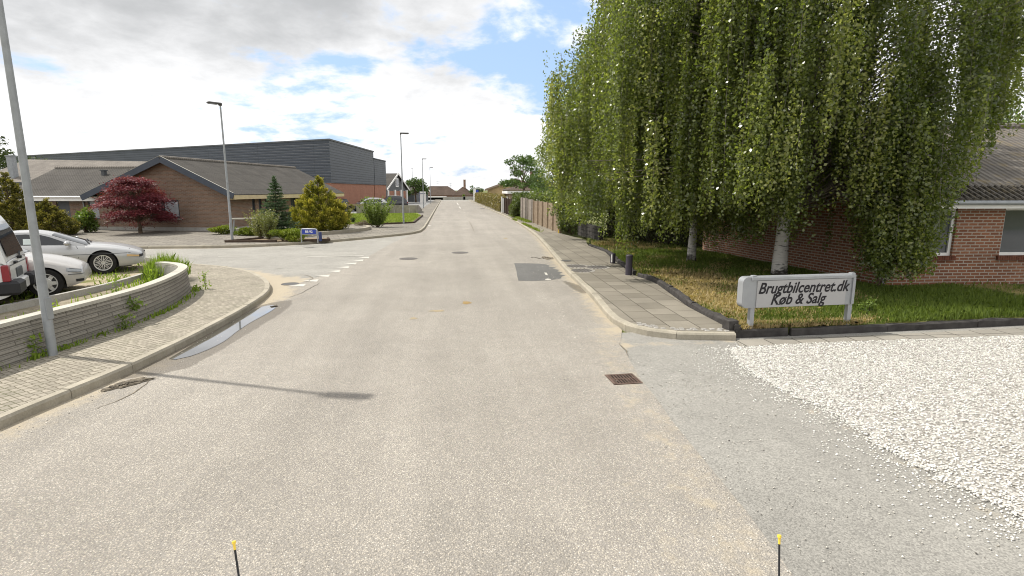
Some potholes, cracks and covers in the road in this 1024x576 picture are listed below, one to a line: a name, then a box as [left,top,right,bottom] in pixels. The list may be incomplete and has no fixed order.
crack [100,377,156,407]
drain grate [605,373,643,385]
pothole [101,377,155,392]
